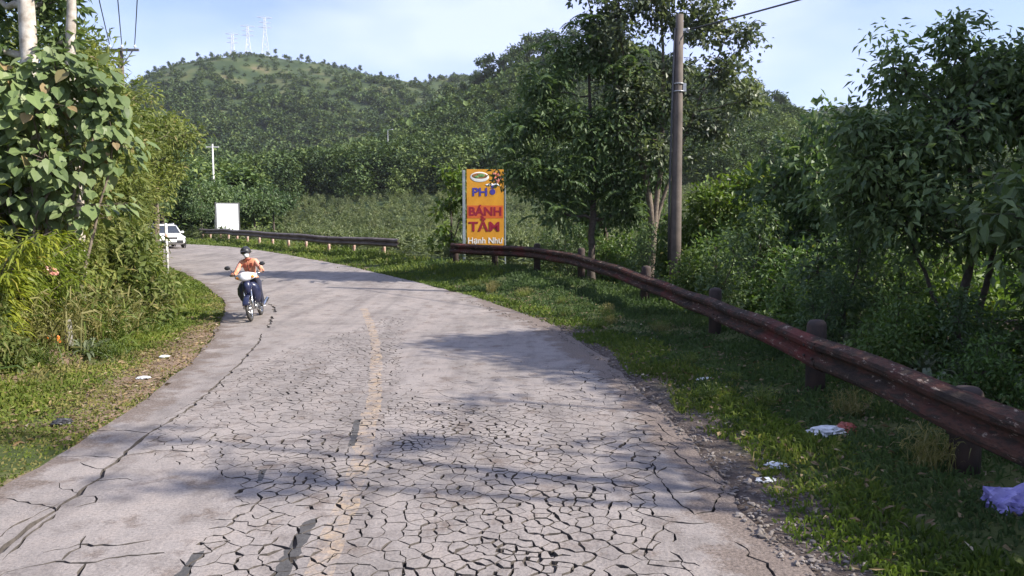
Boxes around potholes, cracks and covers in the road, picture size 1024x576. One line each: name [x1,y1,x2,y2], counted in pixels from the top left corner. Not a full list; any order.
crack [0,304,724,576]
crack [735,542,776,576]
